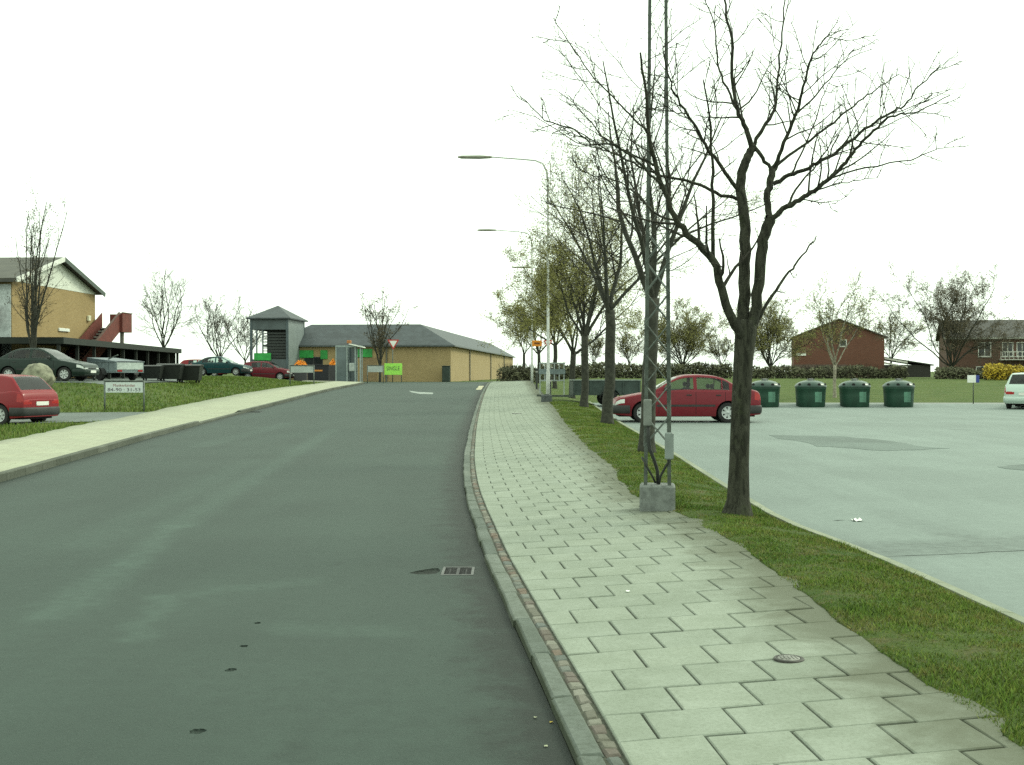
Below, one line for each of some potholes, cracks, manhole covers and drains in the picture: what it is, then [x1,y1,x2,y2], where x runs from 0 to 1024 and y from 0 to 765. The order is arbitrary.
manhole cover [773,654,804,663]
drain grate [441,567,475,575]
